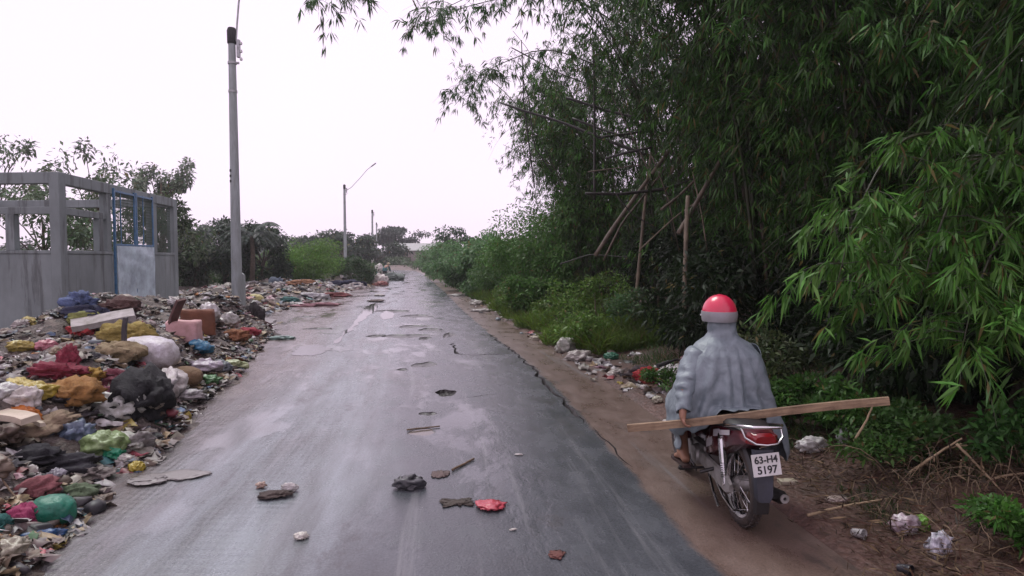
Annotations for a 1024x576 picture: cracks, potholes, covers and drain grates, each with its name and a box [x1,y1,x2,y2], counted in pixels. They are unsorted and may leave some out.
pothole [435,389,457,397]
